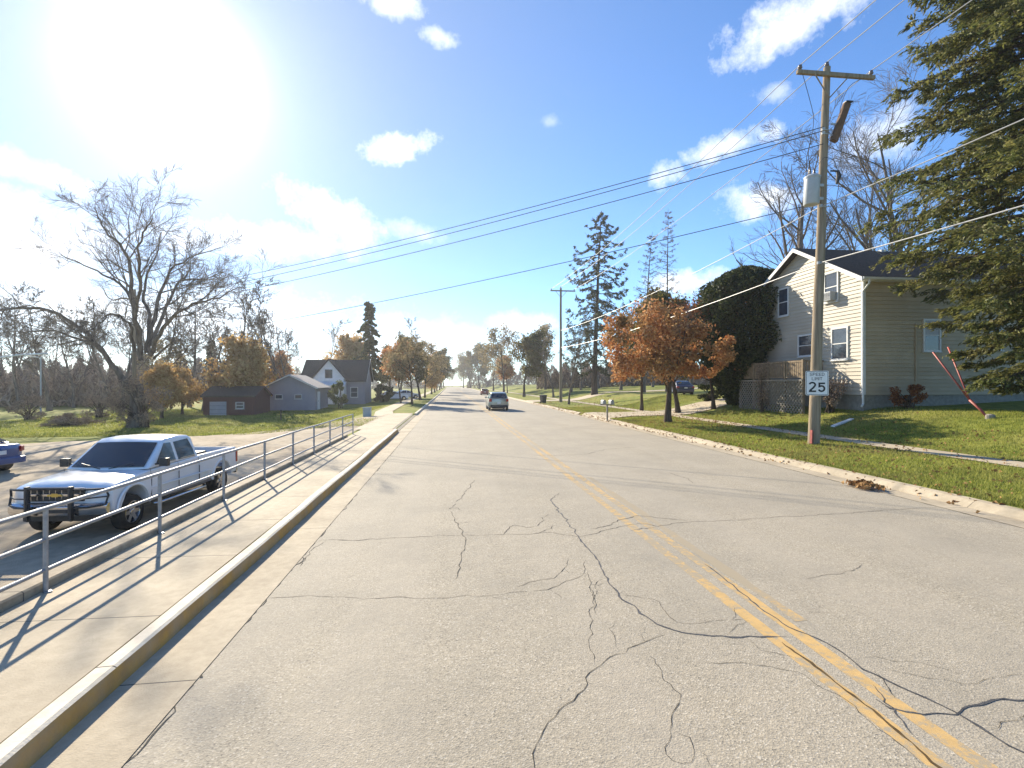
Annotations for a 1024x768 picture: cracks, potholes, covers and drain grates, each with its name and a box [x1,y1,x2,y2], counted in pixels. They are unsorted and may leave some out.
crack [273,563,712,768]
crack [707,642,1014,768]
crack [300,482,934,578]
